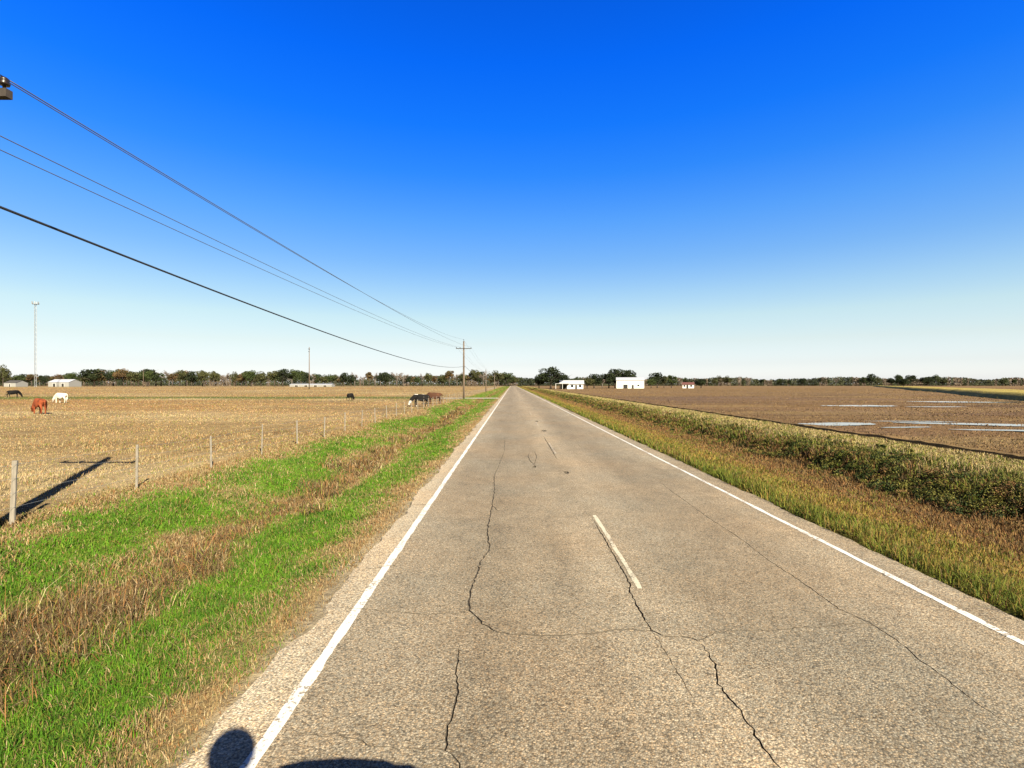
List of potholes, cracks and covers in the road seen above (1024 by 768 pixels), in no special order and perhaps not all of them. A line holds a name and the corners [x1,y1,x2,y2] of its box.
crack [291,443,1023,768]
